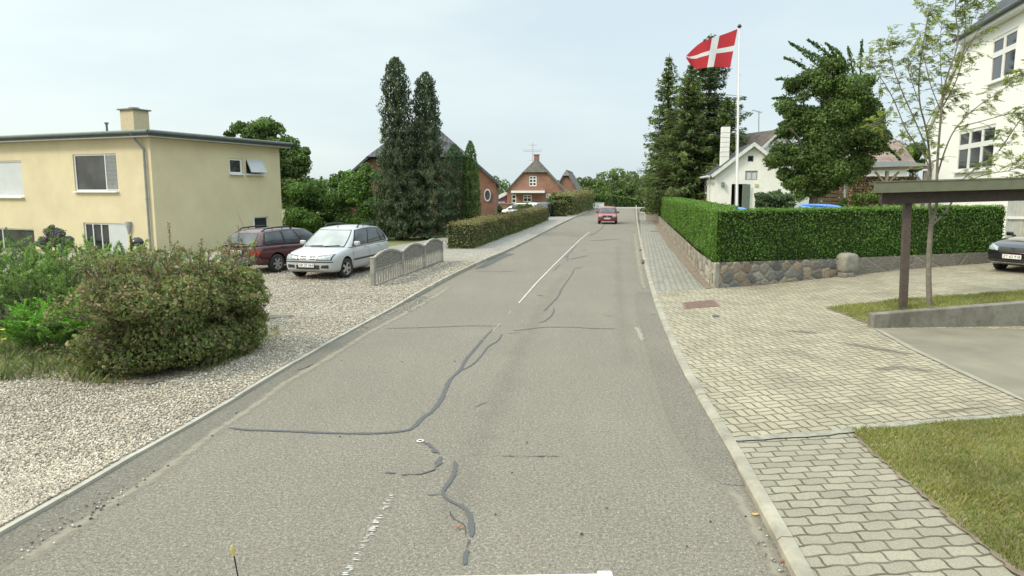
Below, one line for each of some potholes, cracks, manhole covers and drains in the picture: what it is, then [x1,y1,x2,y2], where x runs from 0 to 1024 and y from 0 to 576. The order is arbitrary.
manhole cover [682,300,720,309]
